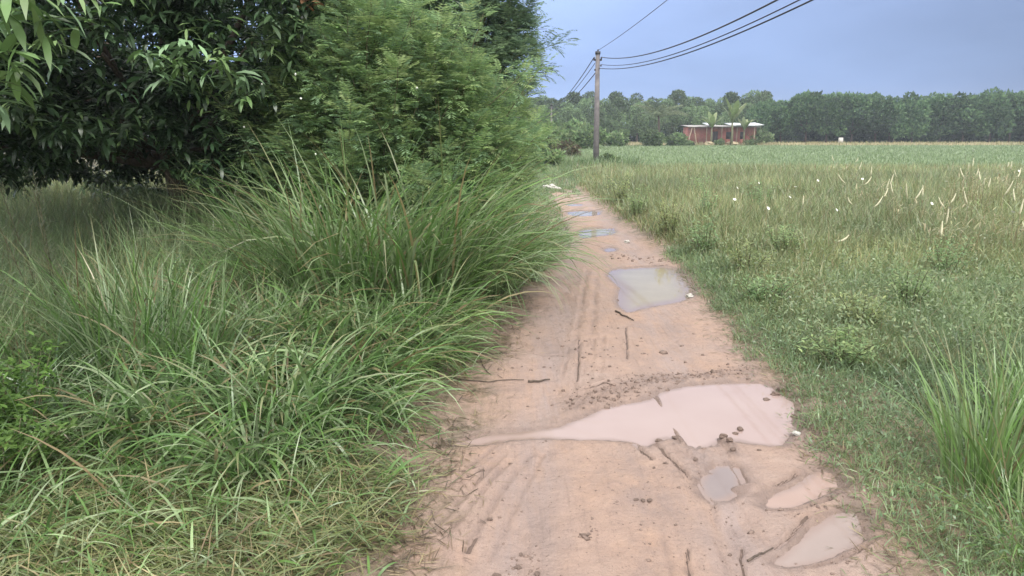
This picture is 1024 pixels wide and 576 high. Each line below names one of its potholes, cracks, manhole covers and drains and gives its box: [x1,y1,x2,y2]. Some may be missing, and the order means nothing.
crack [640,448,691,480]
pothole [758,498,884,575]
pothole [743,458,859,515]
pothole [575,226,619,238]
pothole [602,265,700,313]
pothole [434,377,815,453]
pothole [683,454,757,509]
